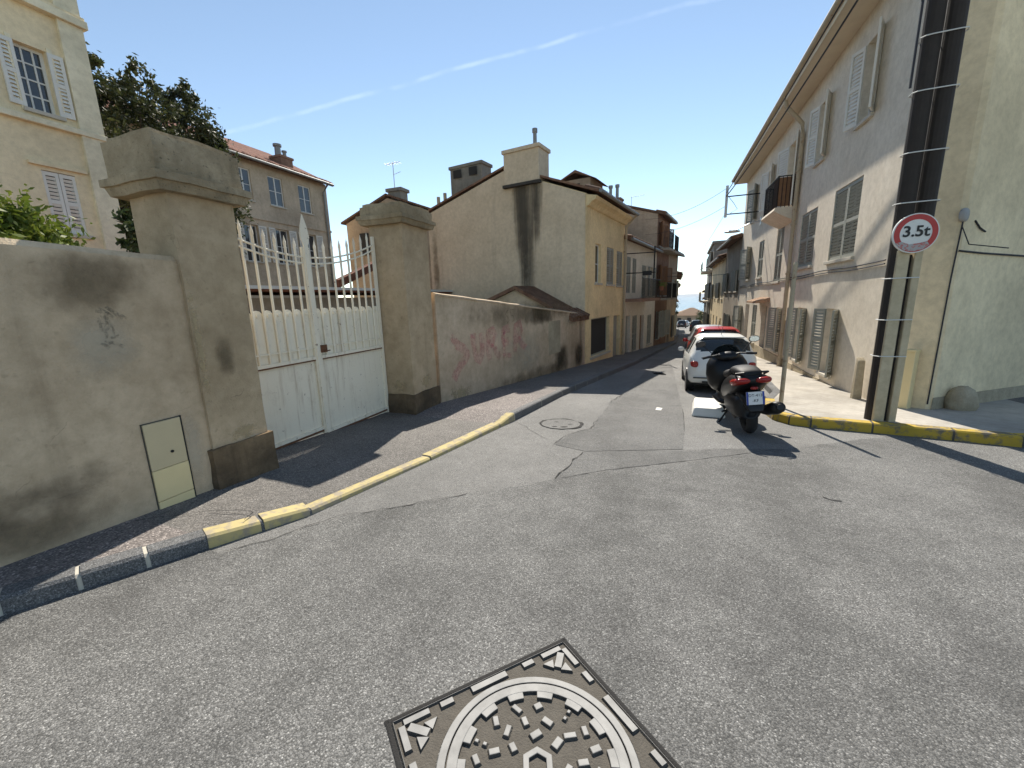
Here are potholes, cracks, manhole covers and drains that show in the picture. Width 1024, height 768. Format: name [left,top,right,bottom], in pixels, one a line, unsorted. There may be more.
manhole cover [540,418,584,429]
manhole cover [384,637,682,768]
crack [515,421,744,478]
